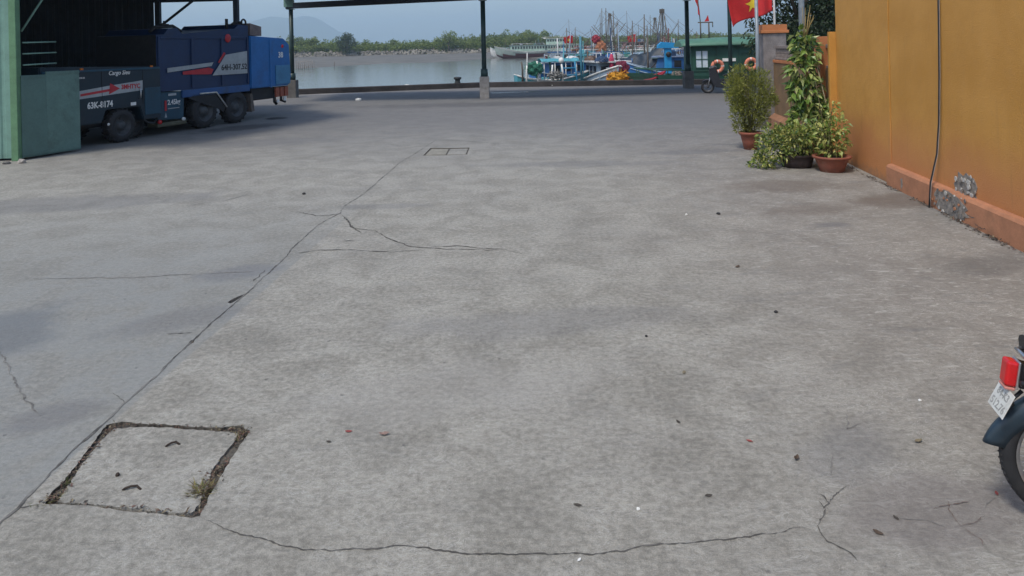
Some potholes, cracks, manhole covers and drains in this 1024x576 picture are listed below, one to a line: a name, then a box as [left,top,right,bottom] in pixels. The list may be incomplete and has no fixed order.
crack [903,494,996,544]
crack [197,486,858,561]
crack [0,352,40,415]
manhole cover [47,425,248,518]
crack [300,212,521,254]
crack [46,269,262,279]
